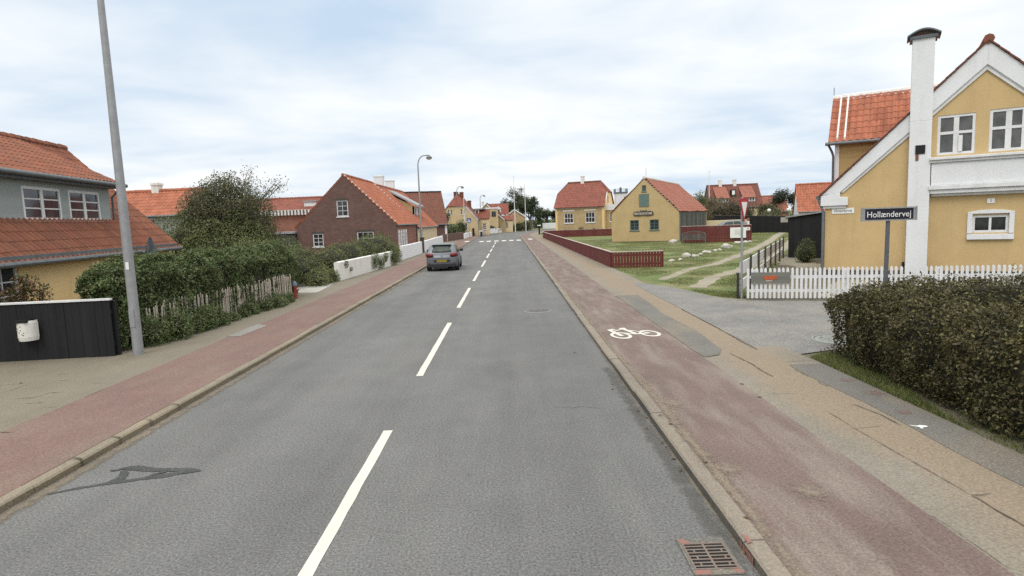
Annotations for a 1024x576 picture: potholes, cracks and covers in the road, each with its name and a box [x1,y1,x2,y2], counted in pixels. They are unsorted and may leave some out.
manhole cover [811,334,846,345]
crack [684,310,828,386]
drain grate [676,537,746,576]
